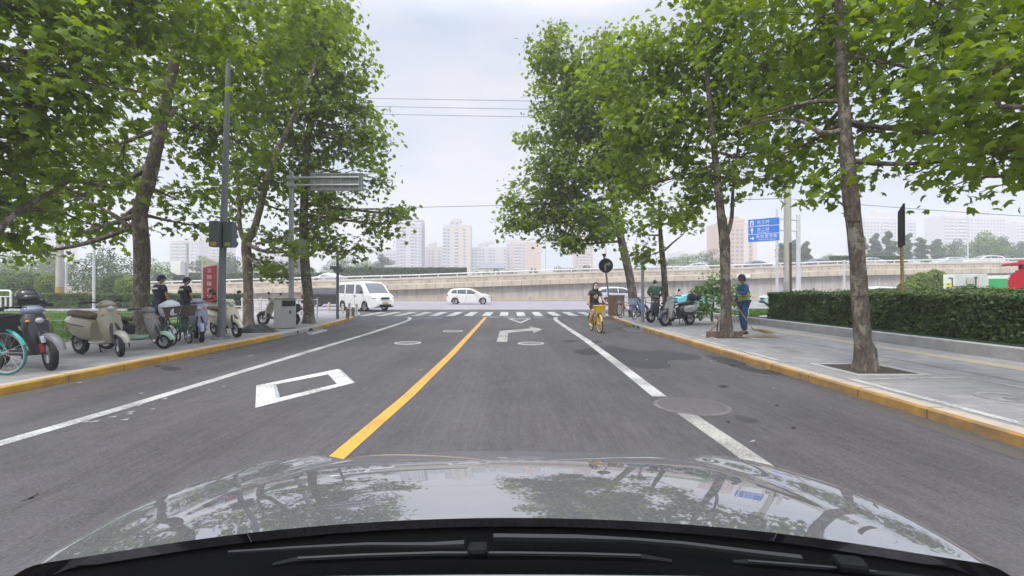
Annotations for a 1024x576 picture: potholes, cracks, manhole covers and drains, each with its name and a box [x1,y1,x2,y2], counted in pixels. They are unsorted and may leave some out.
manhole cover [653,397,732,416]
